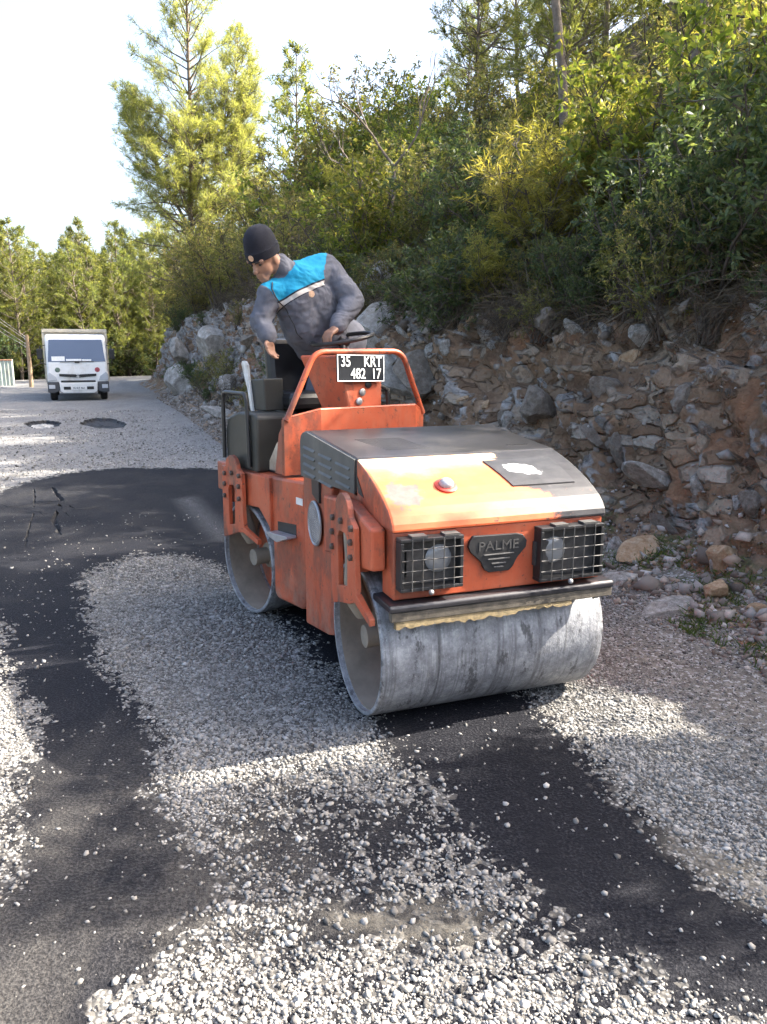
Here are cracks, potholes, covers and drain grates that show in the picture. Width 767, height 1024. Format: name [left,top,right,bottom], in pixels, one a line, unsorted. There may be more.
crack [0,485,104,553]
pothole [72,418,132,430]
pothole [18,420,69,429]
